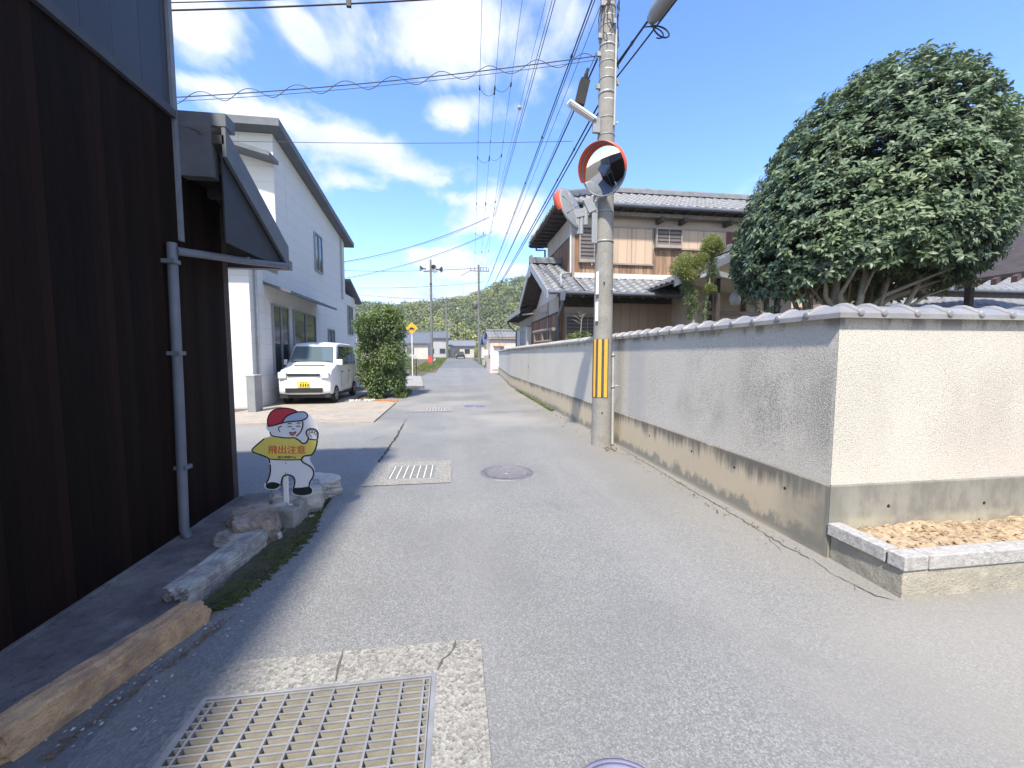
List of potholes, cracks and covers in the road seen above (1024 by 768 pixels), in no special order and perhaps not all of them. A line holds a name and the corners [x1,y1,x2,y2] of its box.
crack [628,452,893,600]
drain grate [362,460,452,486]
drain grate [66,638,492,768]
manhole cover [480,465,533,481]
crack [437,640,456,670]
